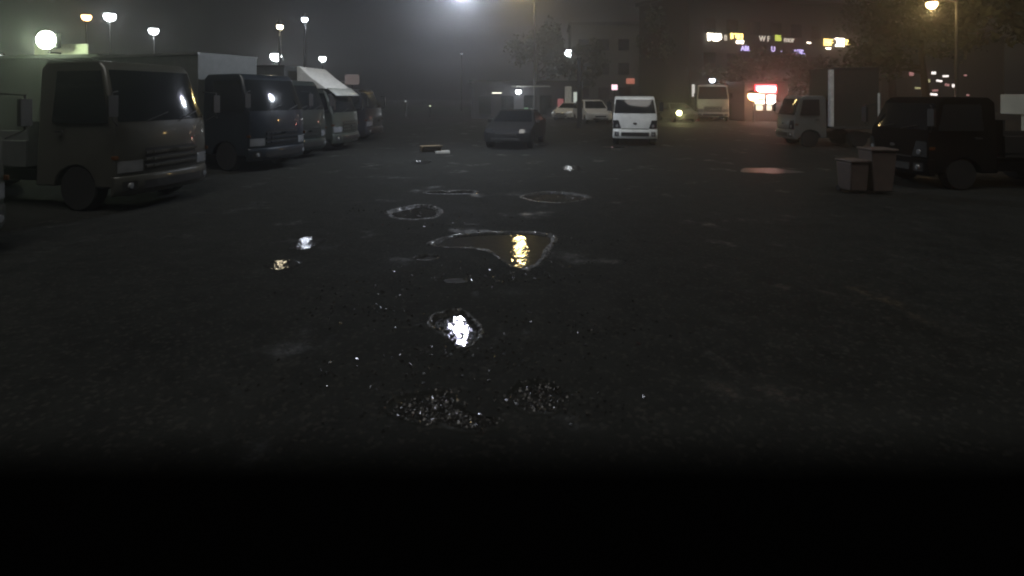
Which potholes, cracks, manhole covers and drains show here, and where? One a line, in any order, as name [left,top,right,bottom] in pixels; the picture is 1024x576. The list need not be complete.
pothole [503,376,570,416]
pothole [520,191,592,203]
pothole [379,387,506,435]
pothole [385,204,444,220]
pothole [424,231,559,272]
pothole [426,307,485,349]
